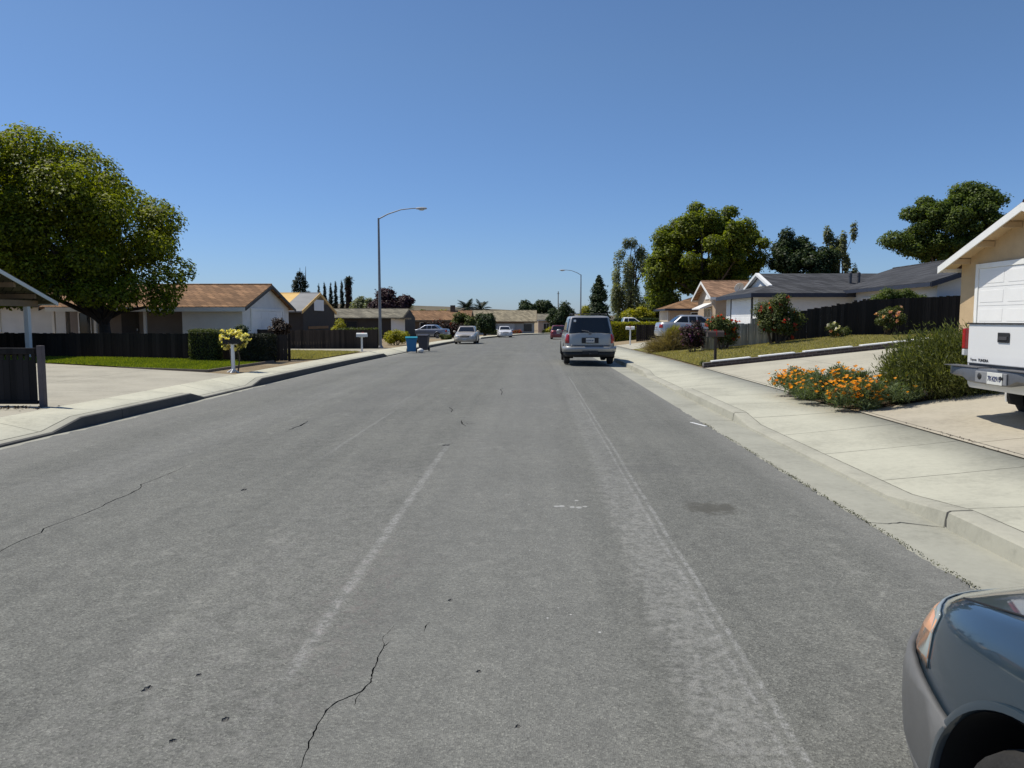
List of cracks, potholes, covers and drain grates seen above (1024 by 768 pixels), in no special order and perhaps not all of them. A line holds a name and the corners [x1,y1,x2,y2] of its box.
crack [301,626,394,767]
crack [1,466,185,551]
